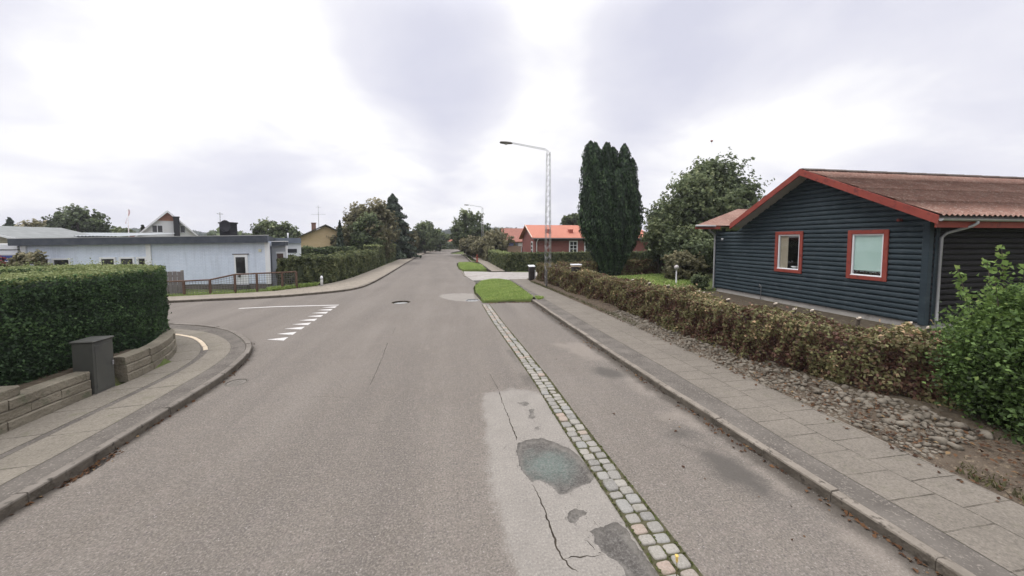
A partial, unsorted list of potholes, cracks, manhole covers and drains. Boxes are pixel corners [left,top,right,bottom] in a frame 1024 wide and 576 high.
crack [490,374,599,571]
